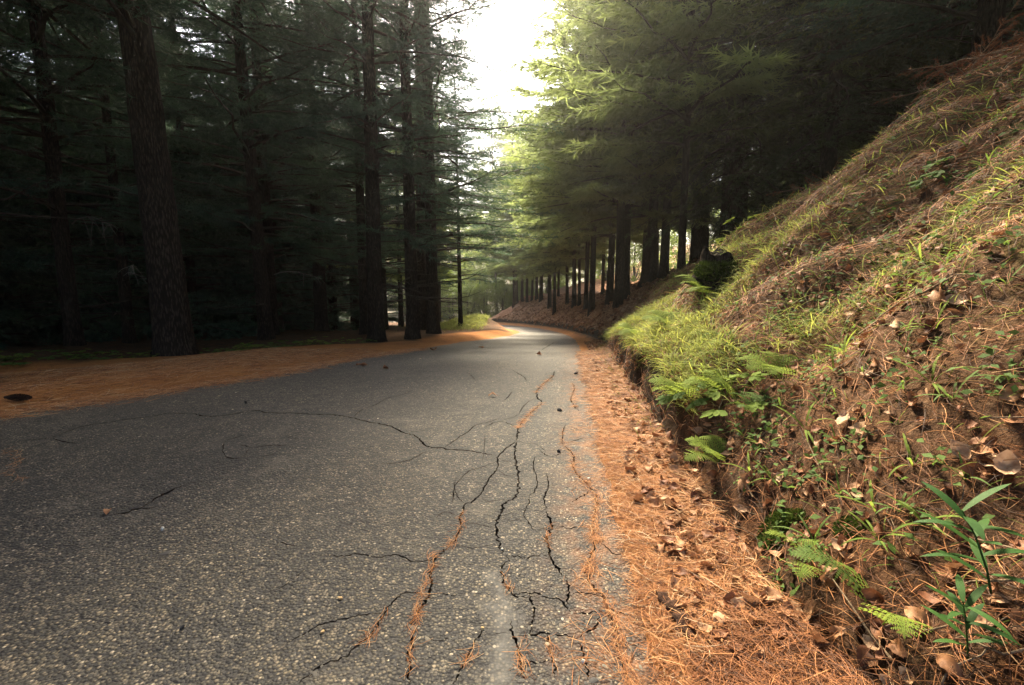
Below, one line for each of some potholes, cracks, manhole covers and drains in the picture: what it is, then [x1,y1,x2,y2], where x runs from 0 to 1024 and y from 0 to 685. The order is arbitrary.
crack [35,371,641,685]
